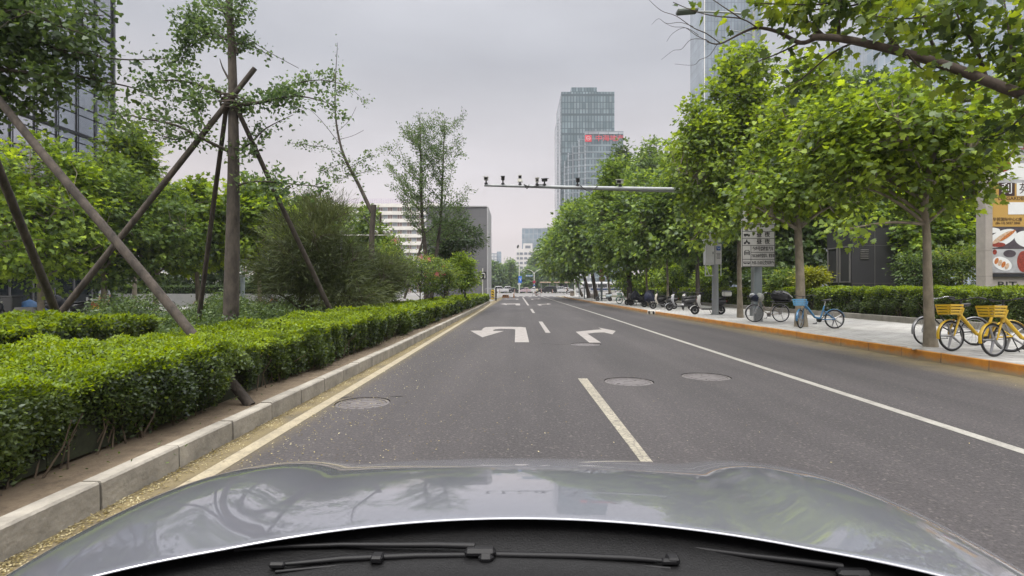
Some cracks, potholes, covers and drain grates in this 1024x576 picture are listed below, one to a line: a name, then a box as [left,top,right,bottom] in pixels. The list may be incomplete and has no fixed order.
manhole cover [335,398,390,409]
manhole cover [682,373,731,381]
manhole cover [605,378,653,386]
